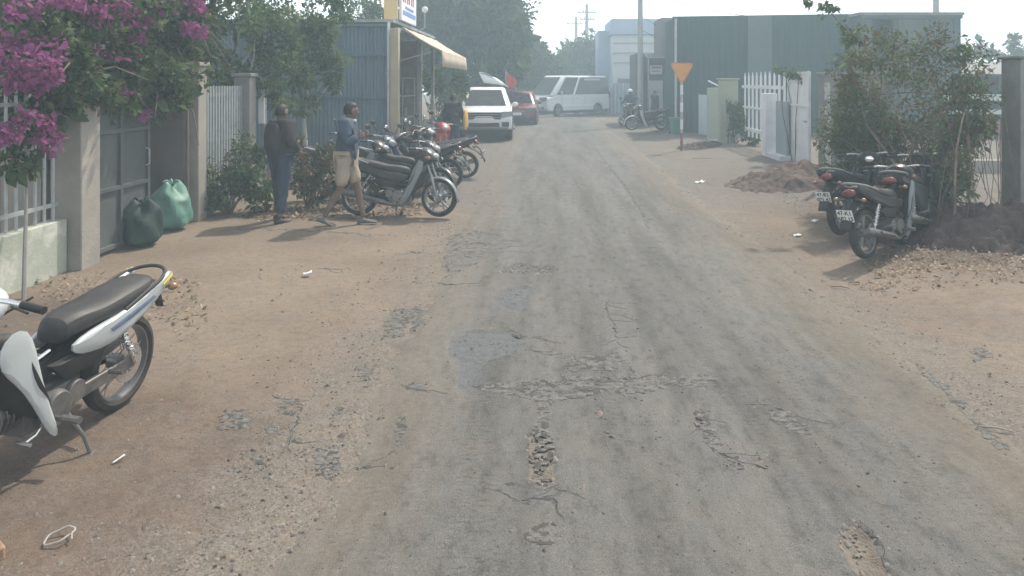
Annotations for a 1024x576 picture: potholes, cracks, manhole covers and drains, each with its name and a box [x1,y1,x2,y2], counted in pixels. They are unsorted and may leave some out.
crack [484,482,585,522]
pothole [834,519,891,576]
crack [691,414,767,469]
pothole [522,432,561,489]
crack [472,302,716,408]
crack [272,388,324,460]
